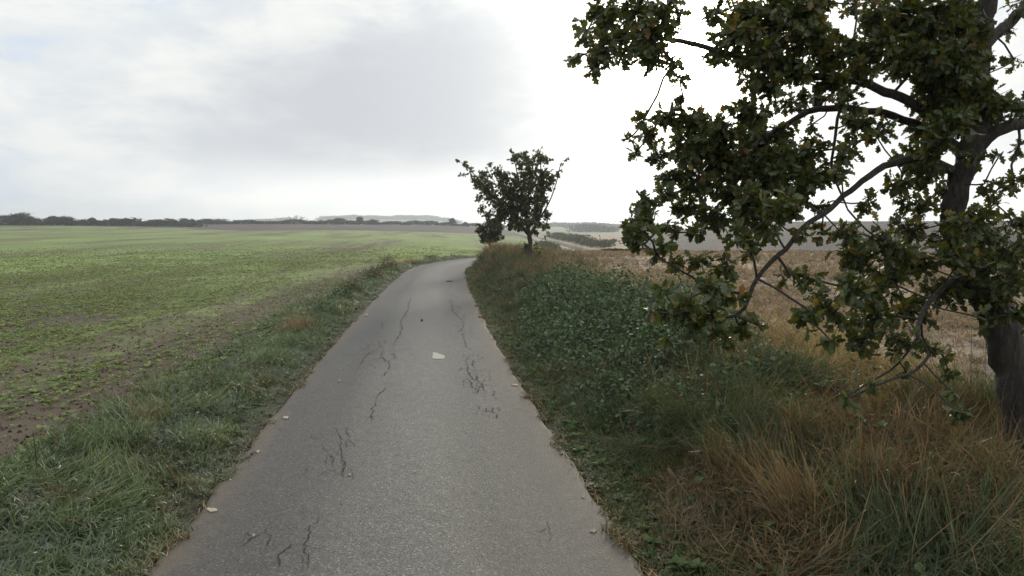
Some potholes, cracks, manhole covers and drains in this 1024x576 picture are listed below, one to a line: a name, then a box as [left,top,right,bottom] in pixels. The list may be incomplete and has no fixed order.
crack [343,293,411,423]
crack [451,296,500,421]
crack [240,515,328,572]
crack [299,428,358,481]
